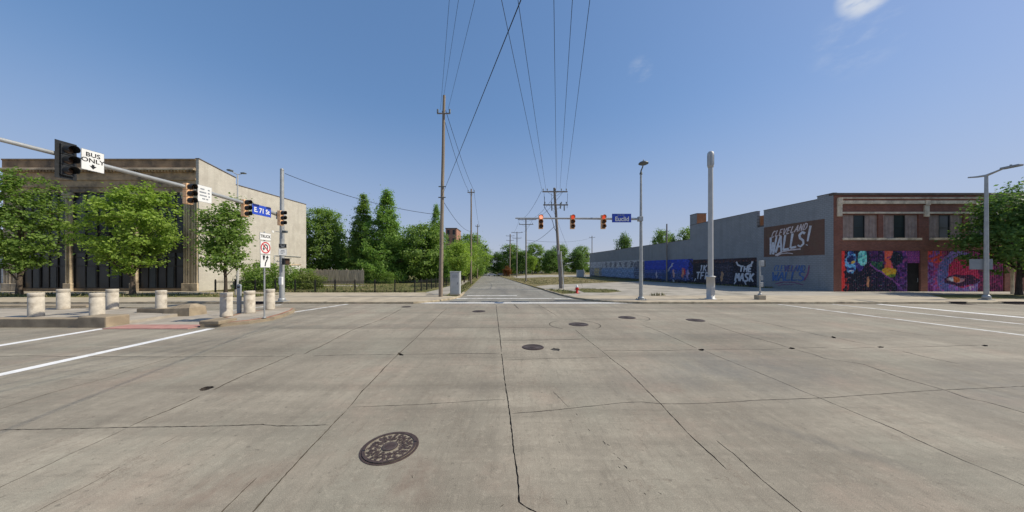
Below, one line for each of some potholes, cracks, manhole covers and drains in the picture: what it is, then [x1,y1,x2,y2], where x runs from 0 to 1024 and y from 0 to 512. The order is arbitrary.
manhole cover [359,432,419,466]
crack [511,386,1020,414]
